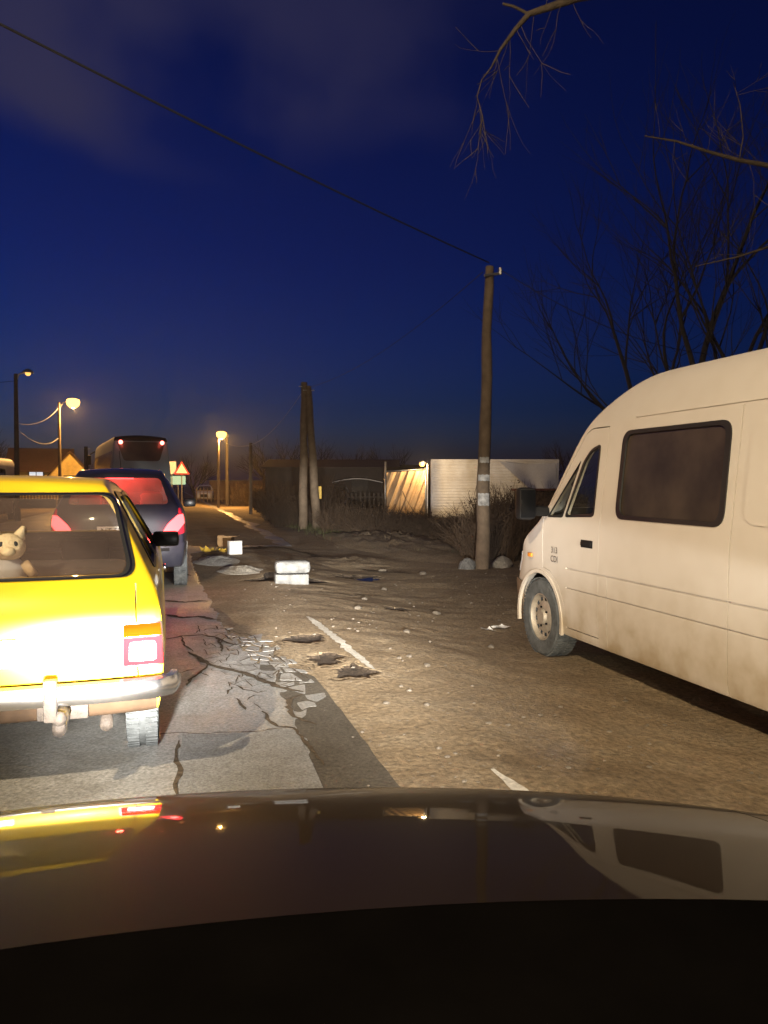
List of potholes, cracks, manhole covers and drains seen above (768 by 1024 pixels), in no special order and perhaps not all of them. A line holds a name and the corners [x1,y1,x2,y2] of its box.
pothole [328,661,388,680]
crack [165,600,324,765]
pothole [275,633,330,645]
crack [173,740,184,794]
pothole [300,651,351,668]
